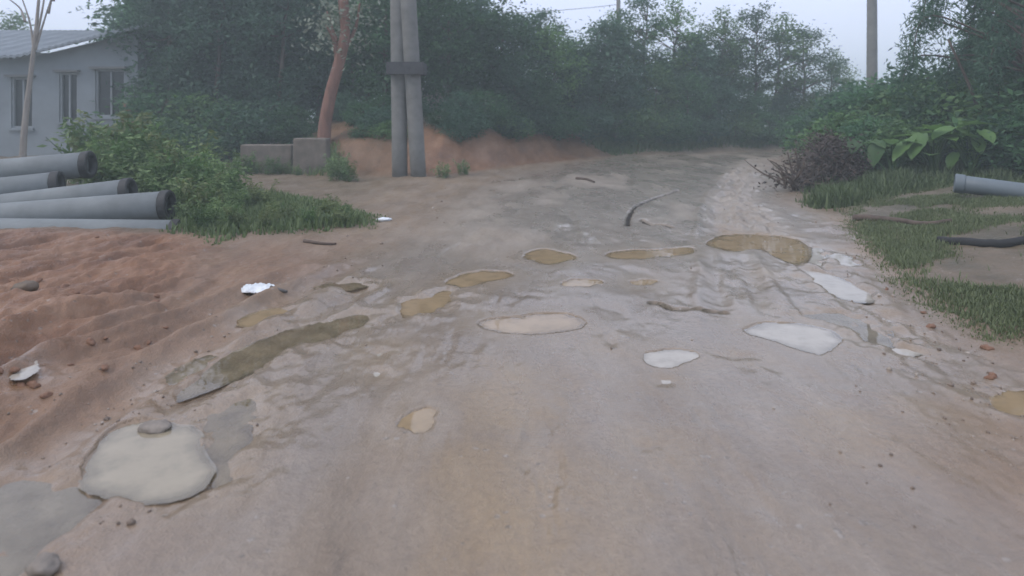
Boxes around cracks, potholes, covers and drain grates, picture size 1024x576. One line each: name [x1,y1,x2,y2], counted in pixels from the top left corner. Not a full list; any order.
pothole [703,232,814,266]
pothole [602,246,698,260]
pothole [393,405,440,434]
pothole [69,415,224,509]
pothole [639,347,703,369]
pothole [474,311,590,336]
pothole [441,269,517,288]
pothole [519,248,580,265]
pothole [737,320,848,356]
